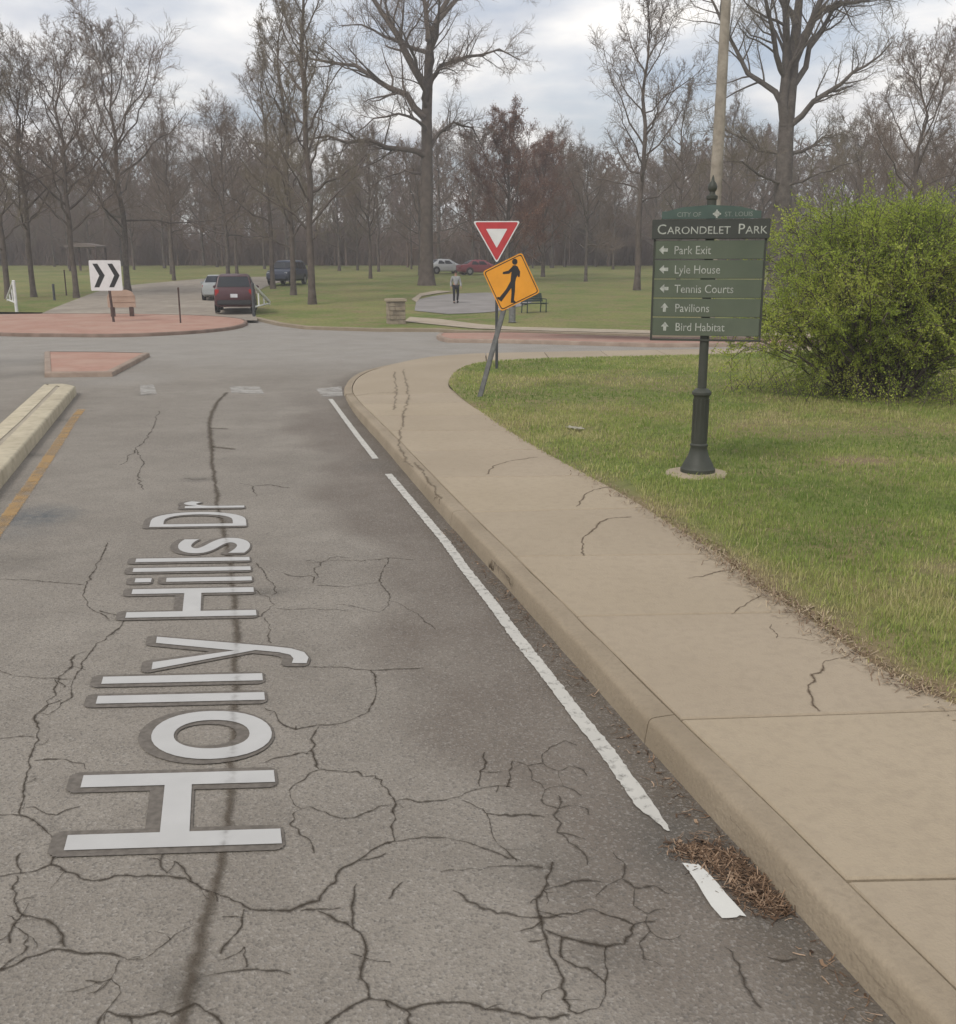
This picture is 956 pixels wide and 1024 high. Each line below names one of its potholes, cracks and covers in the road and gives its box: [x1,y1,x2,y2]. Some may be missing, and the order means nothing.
crack [0,667,678,1024]
crack [808,648,863,709]
crack [256,556,435,642]
crack [727,948,797,1008]
crack [393,376,442,498]
crack [0,542,124,834]
